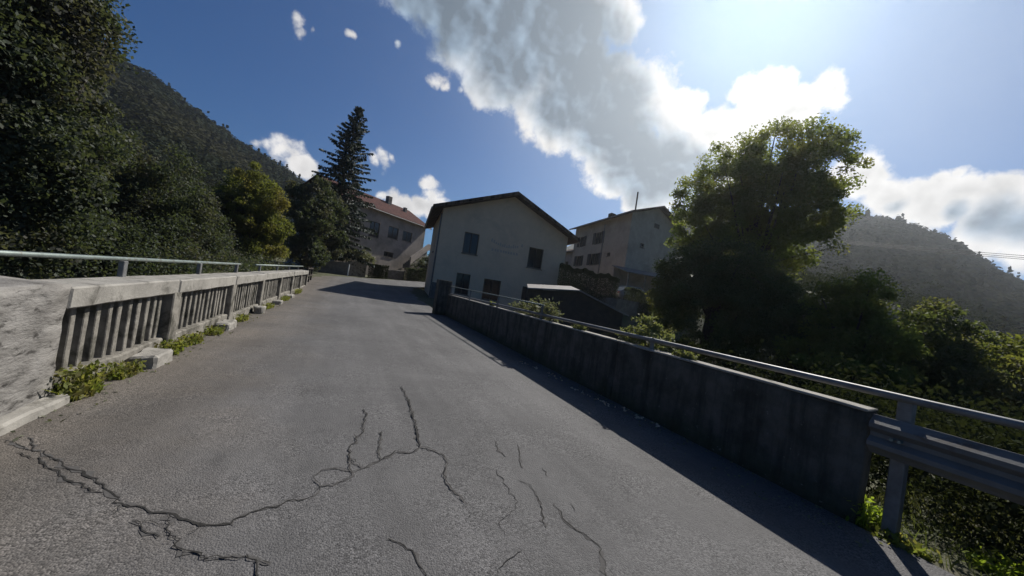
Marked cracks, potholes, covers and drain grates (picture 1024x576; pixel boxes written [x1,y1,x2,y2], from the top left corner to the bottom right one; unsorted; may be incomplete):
crack [495,441,607,576]
crack [5,386,477,576]
